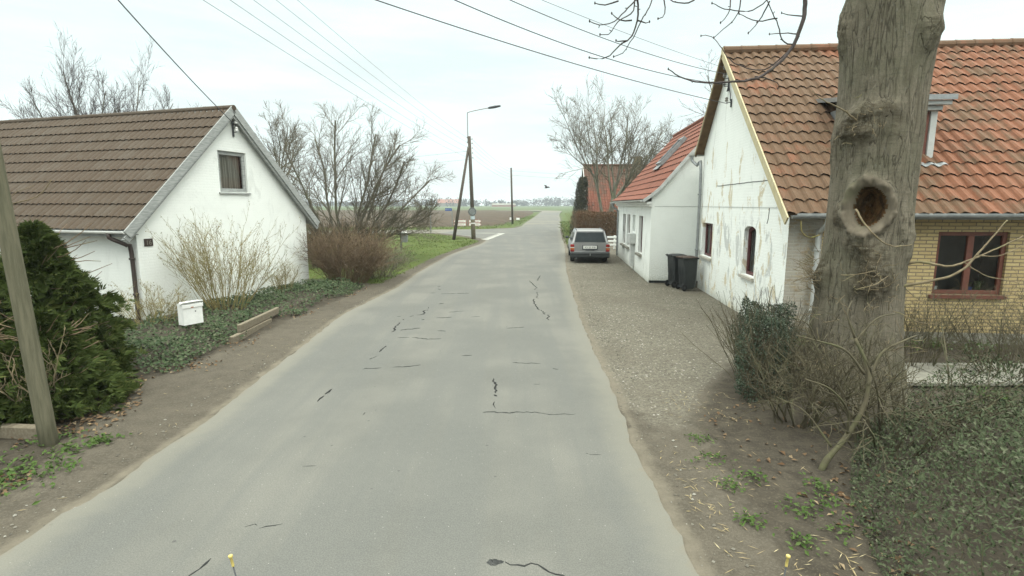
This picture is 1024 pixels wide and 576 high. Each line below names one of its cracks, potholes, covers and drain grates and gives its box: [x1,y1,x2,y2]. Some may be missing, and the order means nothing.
crack [364,286,480,369]
crack [505,562,564,576]
crack [487,362,573,415]
